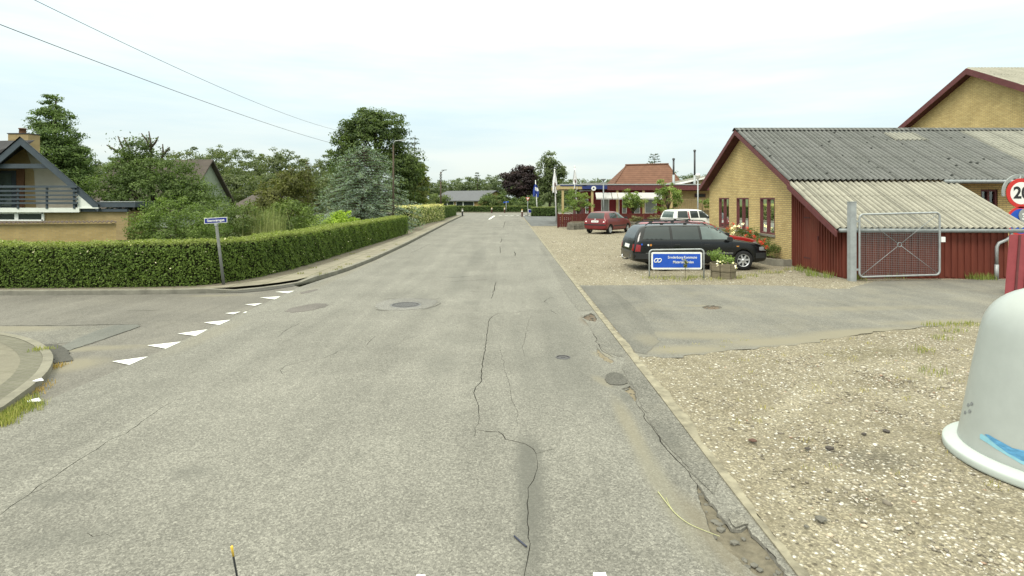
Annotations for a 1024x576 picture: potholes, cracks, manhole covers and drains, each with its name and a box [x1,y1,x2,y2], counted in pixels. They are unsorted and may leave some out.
manhole cover [375,298,439,311]
crack [636,403,697,484]
crack [473,310,552,576]
crack [3,399,179,513]
pothole [696,484,787,576]
